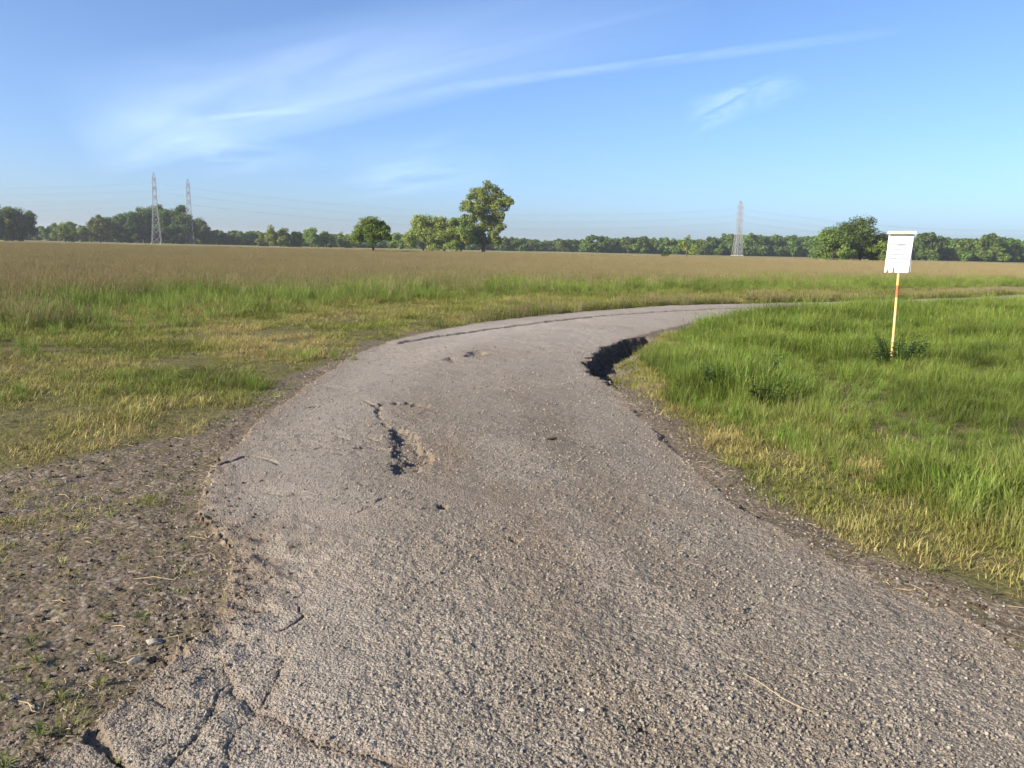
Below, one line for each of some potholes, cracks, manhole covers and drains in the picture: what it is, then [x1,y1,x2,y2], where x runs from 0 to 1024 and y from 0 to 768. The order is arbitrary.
crack [84,654,408,768]
pothole [465,350,492,358]
pothole [386,427,435,475]
pothole [581,336,657,390]
